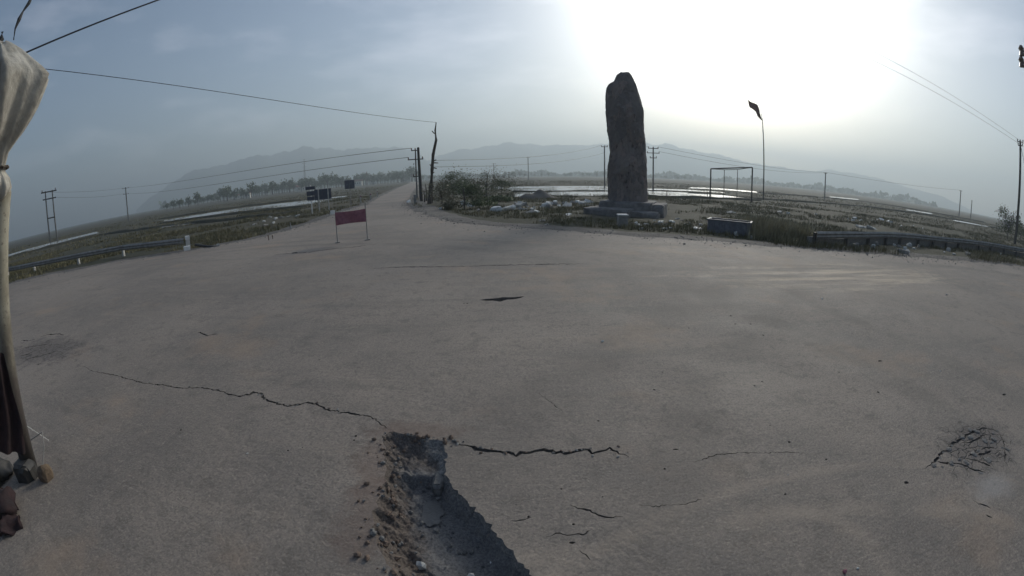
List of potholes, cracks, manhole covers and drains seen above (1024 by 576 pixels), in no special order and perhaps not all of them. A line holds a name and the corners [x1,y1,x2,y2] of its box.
crack [925,427,1008,472]
crack [548,505,623,559]
crack [450,442,629,457]
pothole [372,431,532,576]
crack [702,452,805,460]
crack [89,370,387,428]
